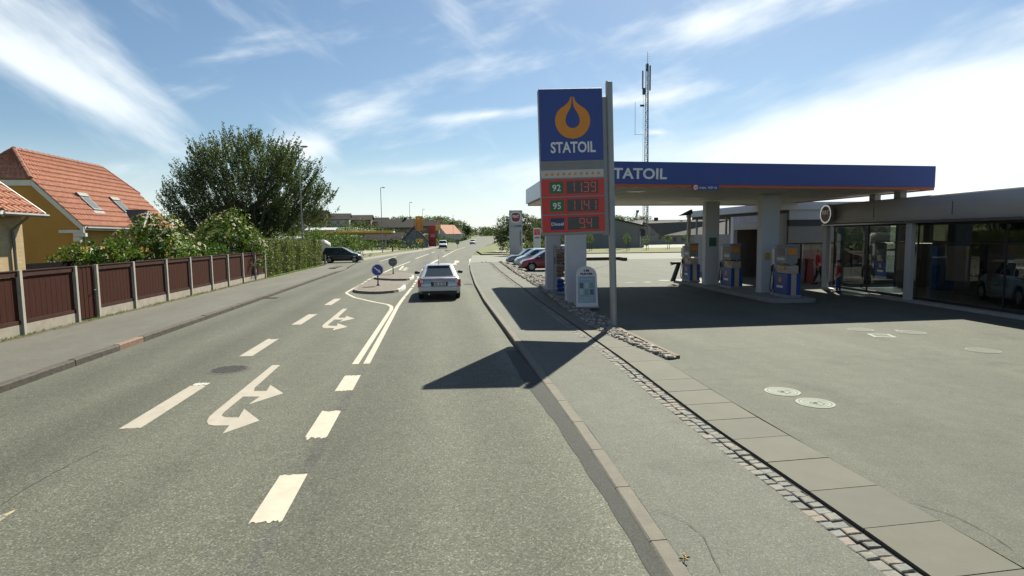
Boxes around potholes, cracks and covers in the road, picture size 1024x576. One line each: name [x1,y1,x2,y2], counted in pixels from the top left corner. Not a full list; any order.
crack [0,447,105,507]
manhole cover [206,365,251,374]
